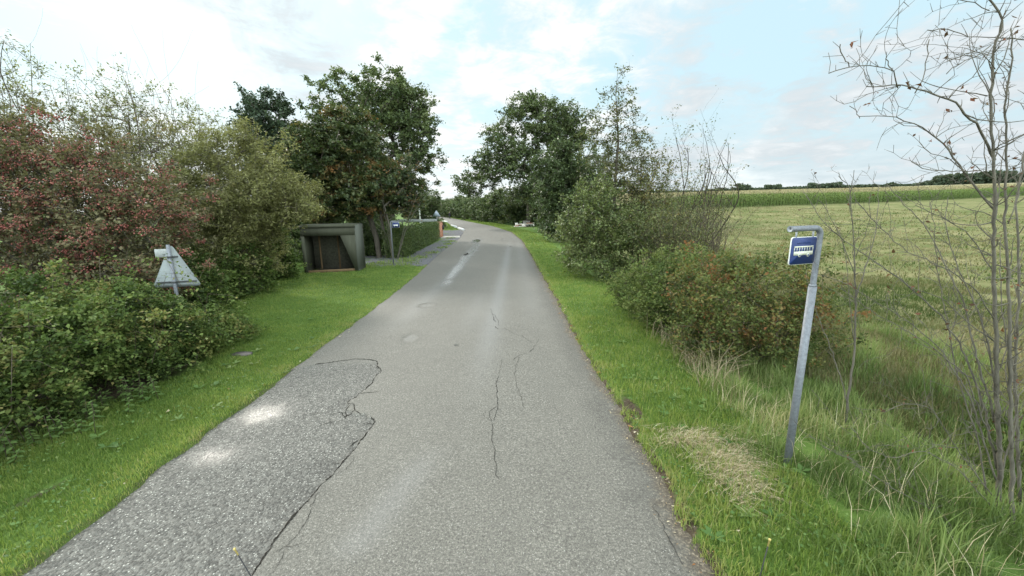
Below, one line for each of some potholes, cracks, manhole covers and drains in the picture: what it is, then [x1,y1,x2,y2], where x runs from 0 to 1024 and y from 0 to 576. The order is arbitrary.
crack [252,359,382,575]
crack [483,314,539,479]
